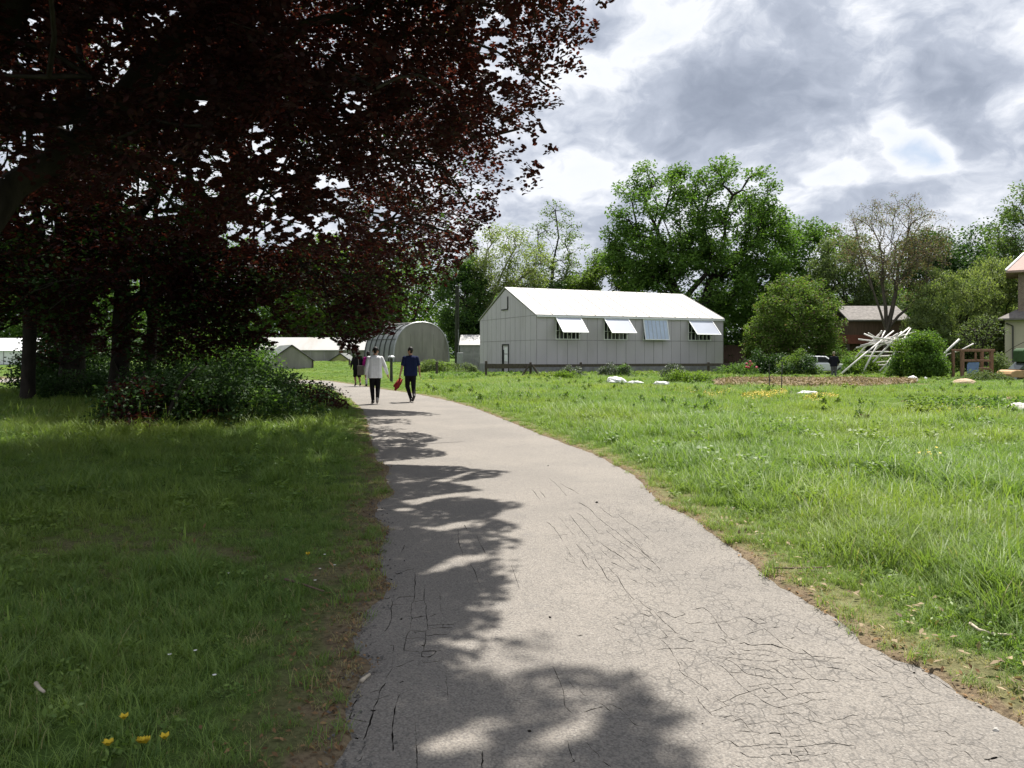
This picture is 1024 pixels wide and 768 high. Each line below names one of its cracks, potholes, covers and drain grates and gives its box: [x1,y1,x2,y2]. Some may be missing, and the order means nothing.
crack [856,657,999,762]
crack [349,569,454,761]
crack [534,479,861,764]
